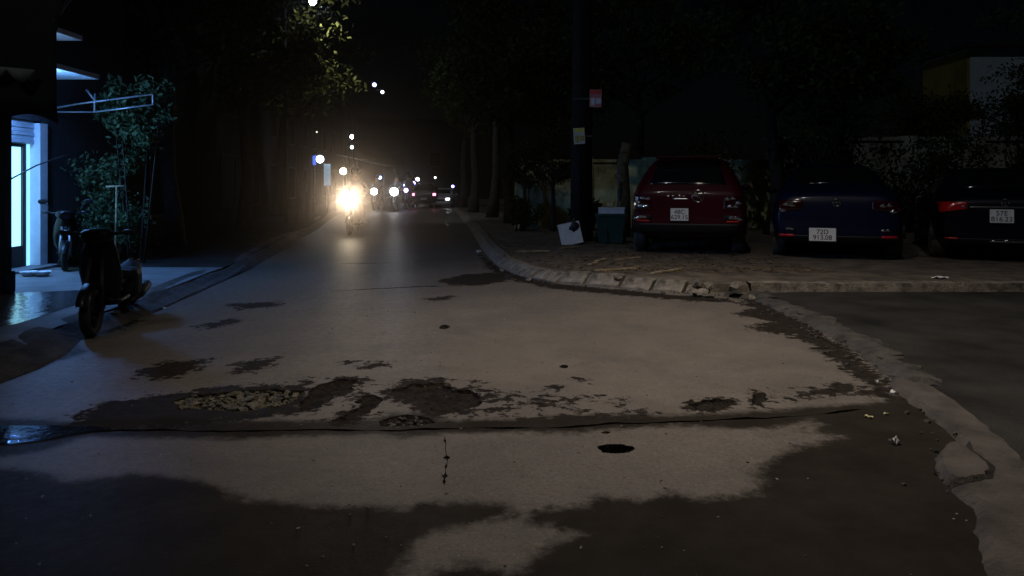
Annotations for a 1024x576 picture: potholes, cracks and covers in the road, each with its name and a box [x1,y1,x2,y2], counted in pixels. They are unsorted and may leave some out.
crack [94,409,860,485]
pothole [172,389,305,412]
pothole [379,415,436,427]
pothole [597,444,635,453]
